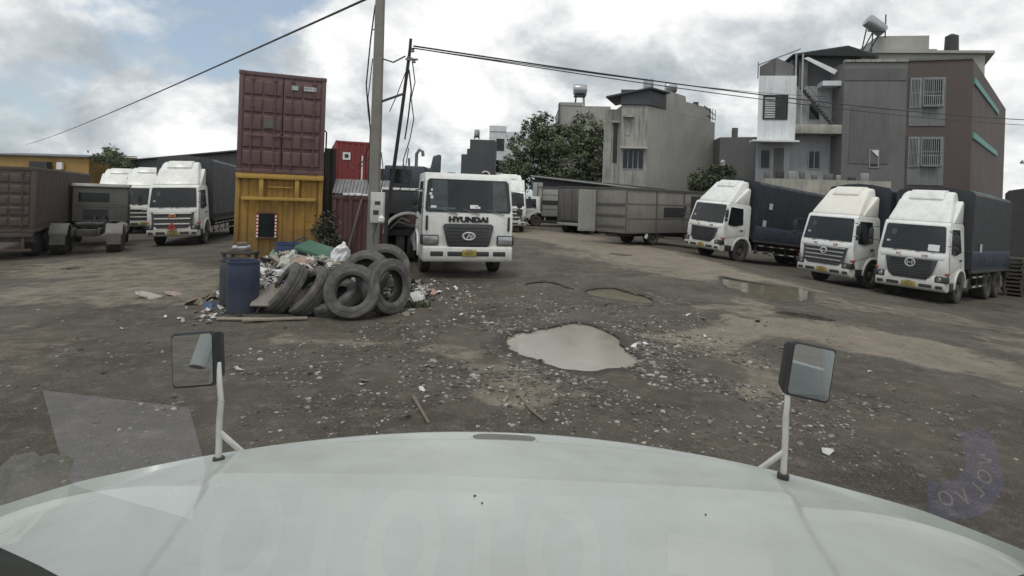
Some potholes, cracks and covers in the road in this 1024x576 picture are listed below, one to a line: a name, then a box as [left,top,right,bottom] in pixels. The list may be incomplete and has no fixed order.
pothole [705,275,827,306]
pothole [566,284,674,306]
pothole [477,317,670,384]
